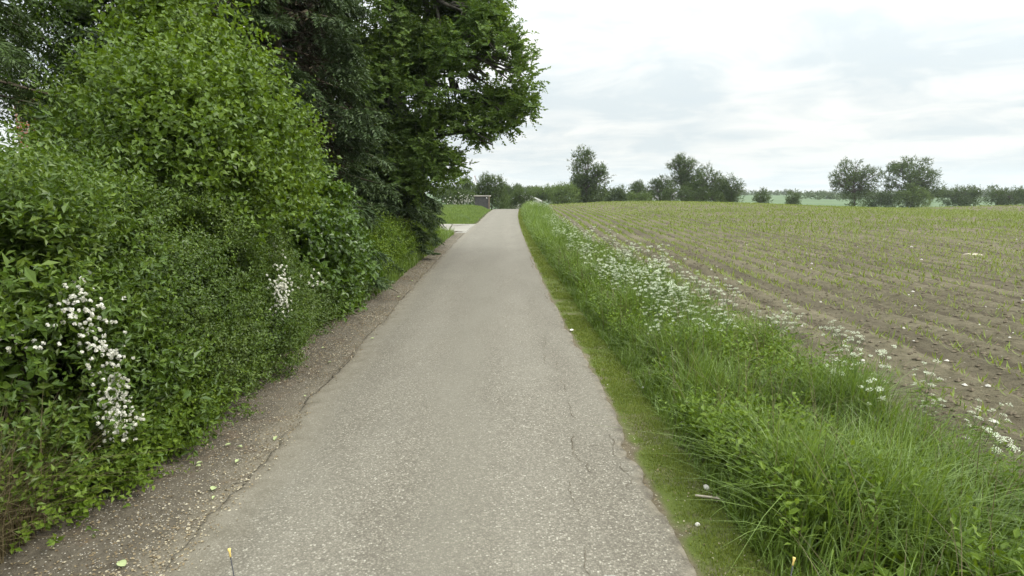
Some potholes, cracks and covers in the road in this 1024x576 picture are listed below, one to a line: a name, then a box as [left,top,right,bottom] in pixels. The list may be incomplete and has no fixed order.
crack [543,342,632,575]
